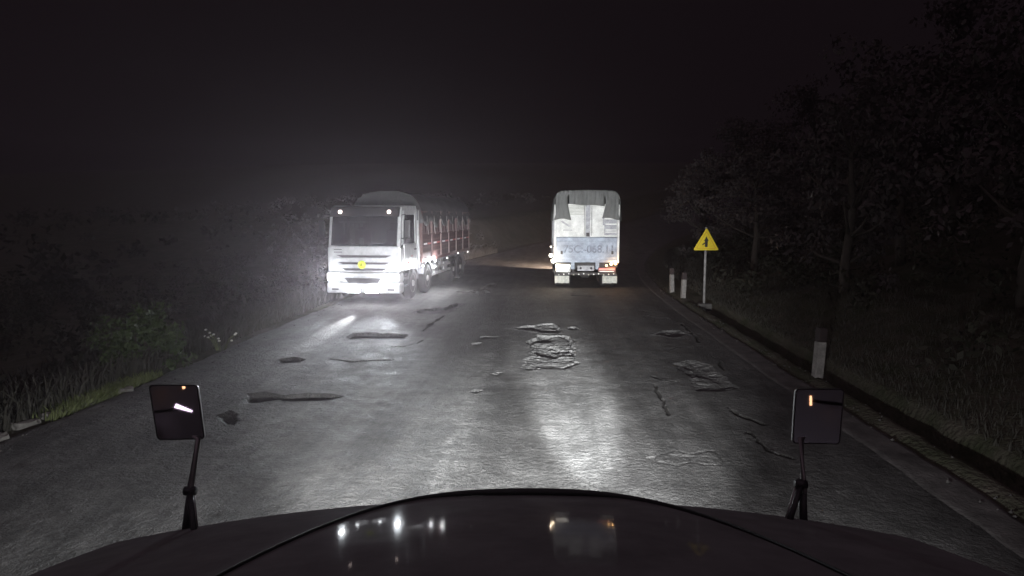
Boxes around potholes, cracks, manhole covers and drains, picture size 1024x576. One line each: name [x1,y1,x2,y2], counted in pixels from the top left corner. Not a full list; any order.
pothole [643,328,690,340]
crack [708,402,816,466]
pothole [509,323,586,359]
pothole [338,331,419,343]
crack [564,294,738,420]
pothole [507,354,592,373]
pothole [660,358,752,395]
pothole [224,389,356,406]
